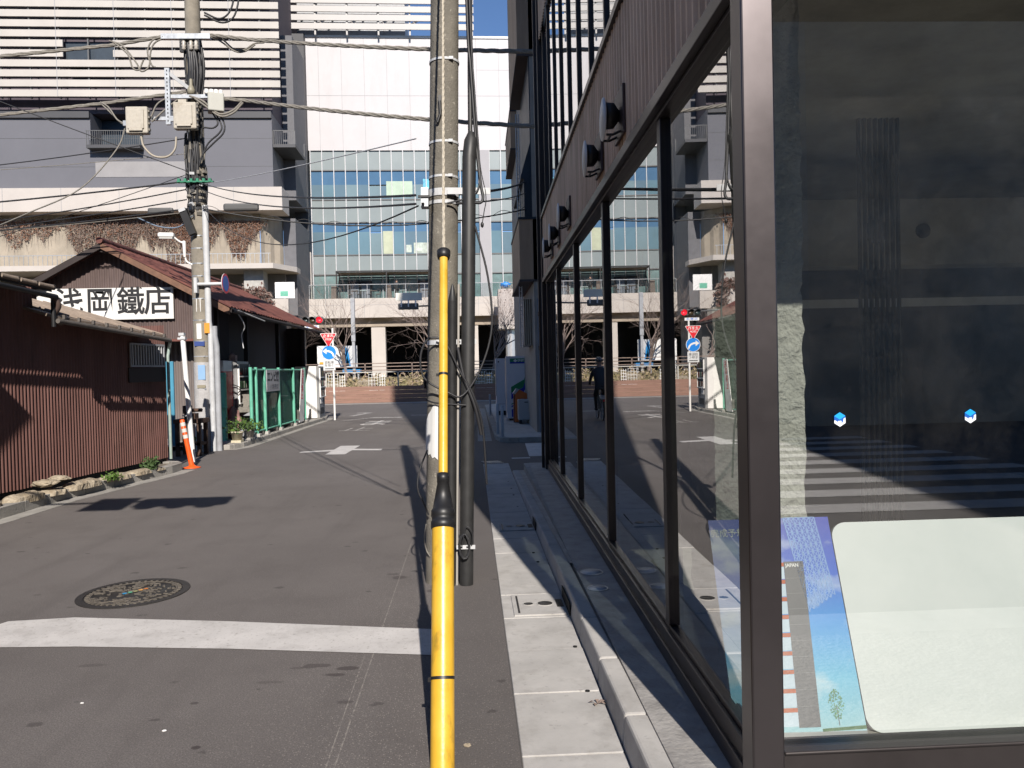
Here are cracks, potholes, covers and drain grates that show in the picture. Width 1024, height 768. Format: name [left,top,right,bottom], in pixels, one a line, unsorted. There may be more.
manhole cover [74,578,190,609]
